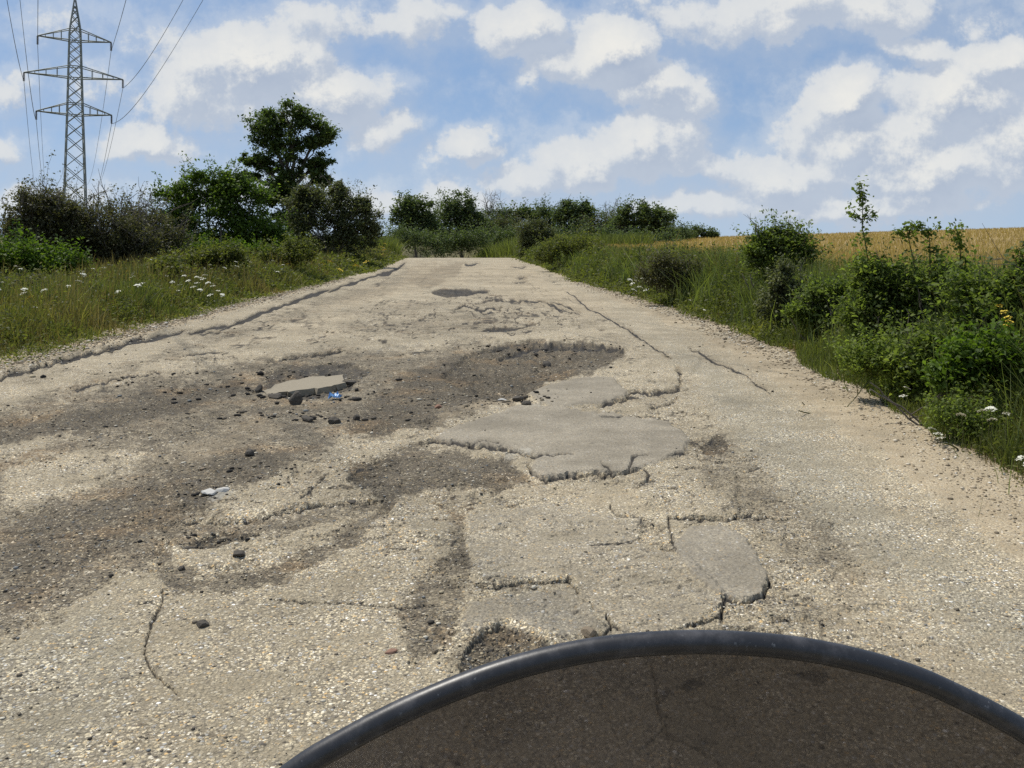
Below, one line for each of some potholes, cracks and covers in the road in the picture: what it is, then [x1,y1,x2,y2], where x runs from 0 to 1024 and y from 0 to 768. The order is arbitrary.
crack [0,262,406,394]
crack [455,265,772,420]
crack [577,613,622,640]
crack [475,574,580,595]
crack [271,599,442,611]
pothole [440,338,622,400]
pothole [423,287,490,298]
crack [418,437,794,551]
pothole [458,621,563,673]
crack [137,589,179,697]
pothole [262,360,373,400]
